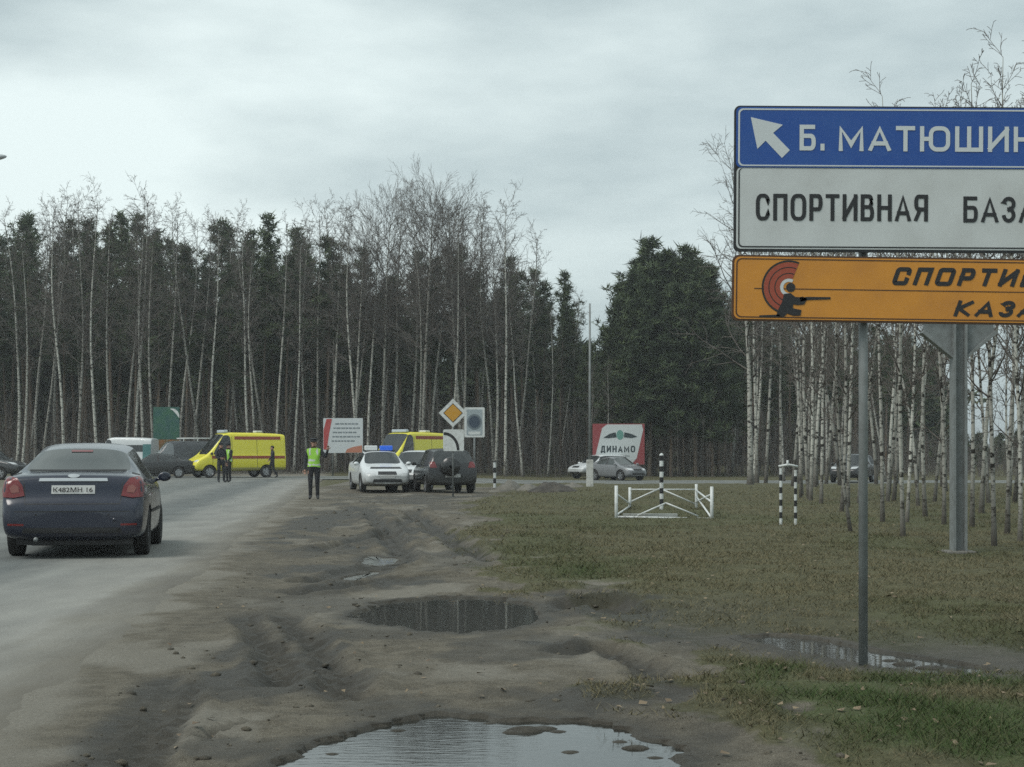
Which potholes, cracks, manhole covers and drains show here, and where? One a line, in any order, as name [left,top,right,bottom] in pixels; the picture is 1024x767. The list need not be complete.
pothole [336,570,387,580]
pothole [257,709,701,767]
pothole [340,595,554,634]
pothole [355,555,407,566]
